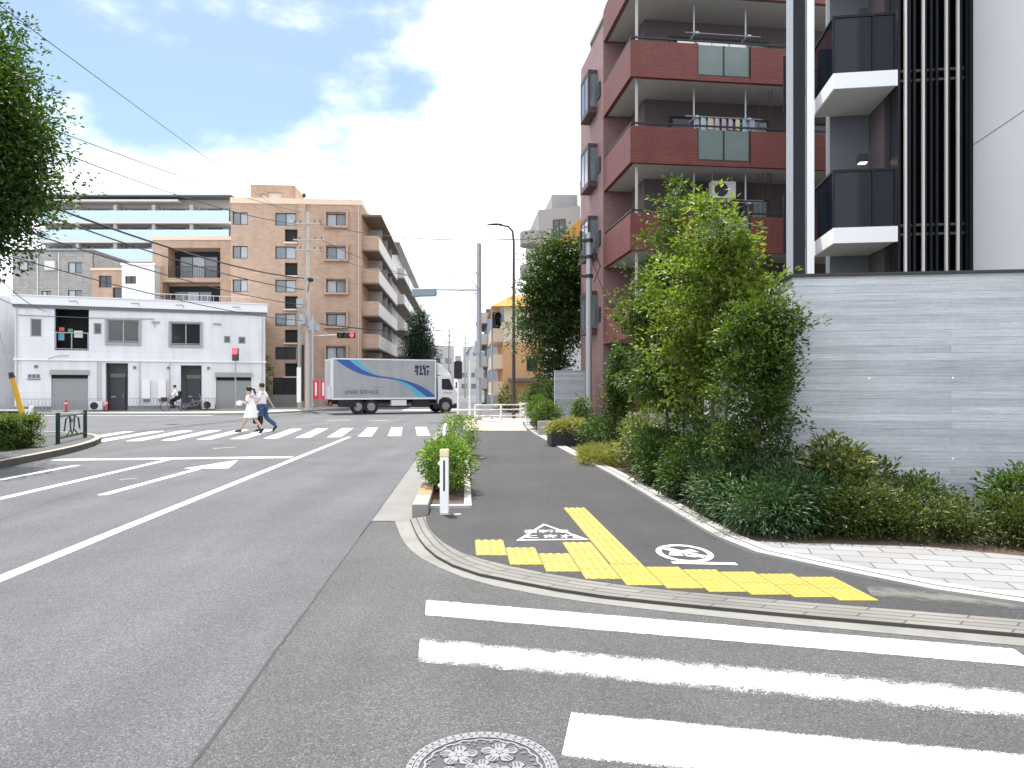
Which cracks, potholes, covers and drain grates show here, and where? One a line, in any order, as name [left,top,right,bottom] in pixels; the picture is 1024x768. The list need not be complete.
manhole cover [405,732,559,768]
